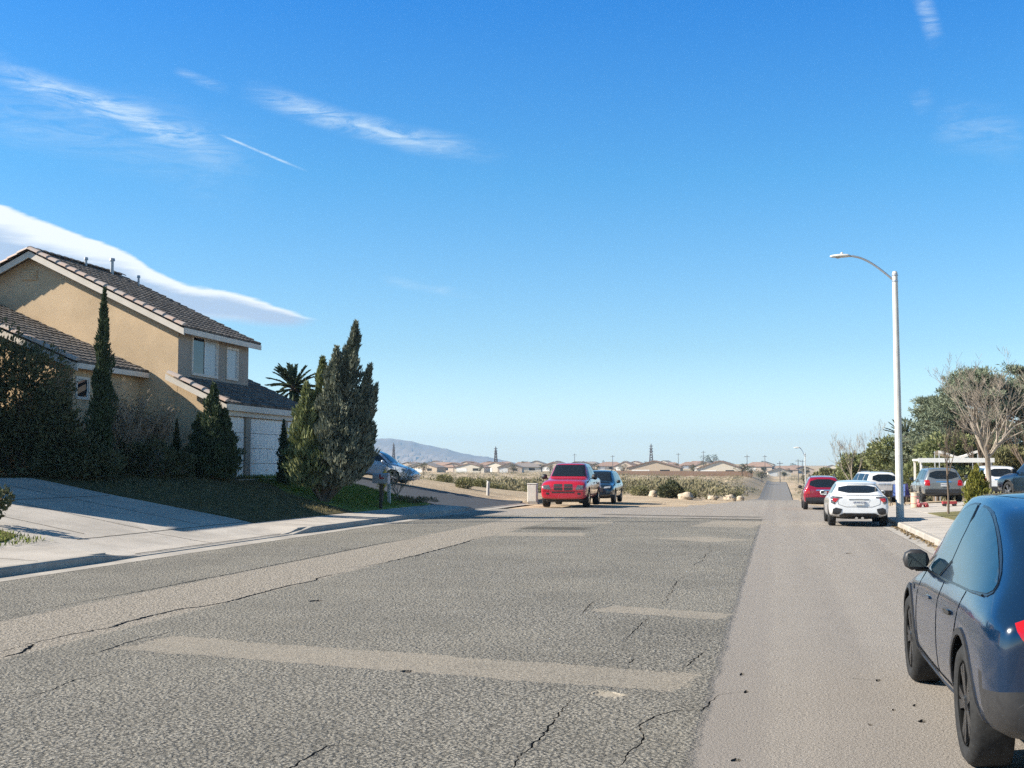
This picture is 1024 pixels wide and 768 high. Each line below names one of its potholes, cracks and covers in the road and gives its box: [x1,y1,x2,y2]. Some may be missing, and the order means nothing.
crack [623,543,716,641]
crack [0,534,488,658]
crack [289,744,375,768]
crack [513,699,573,768]
